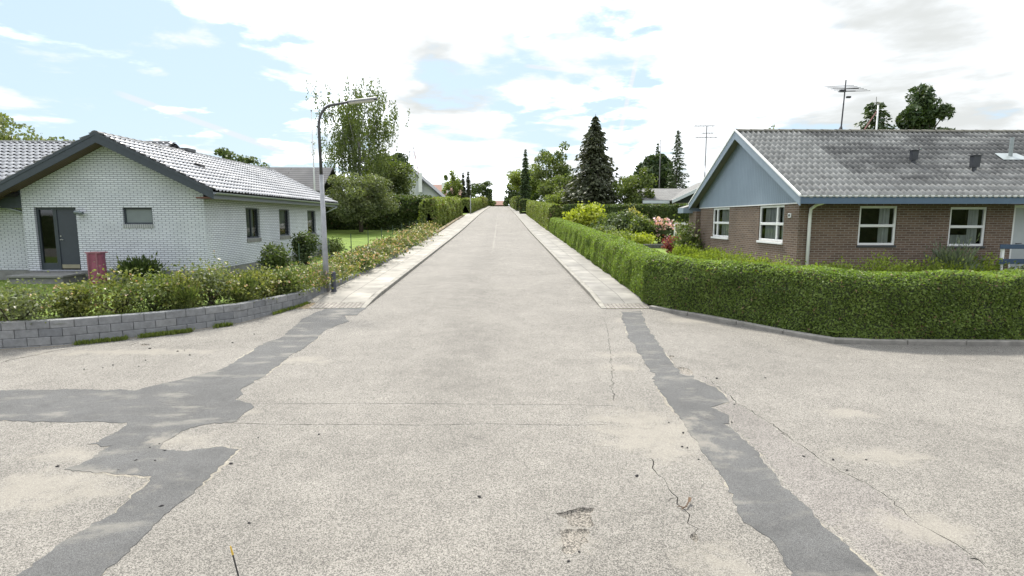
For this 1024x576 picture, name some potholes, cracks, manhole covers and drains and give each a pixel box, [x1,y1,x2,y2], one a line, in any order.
crack [651,458,699,531]
pothole [556,507,594,528]
pothole [560,528,590,554]
crack [703,376,996,573]
